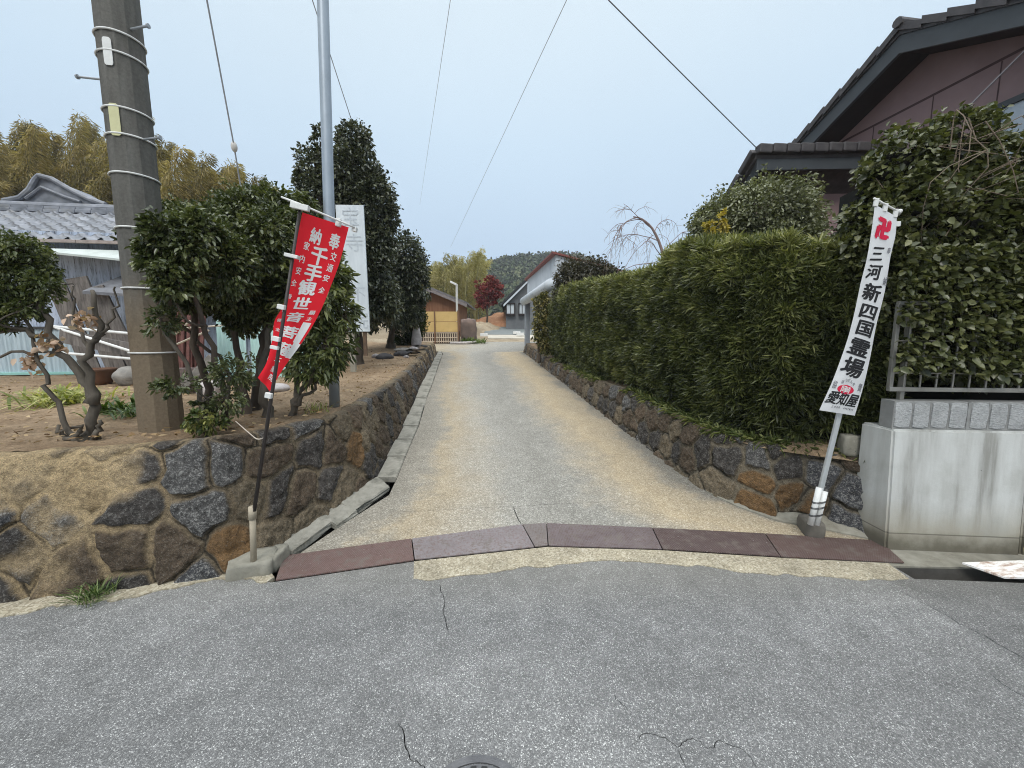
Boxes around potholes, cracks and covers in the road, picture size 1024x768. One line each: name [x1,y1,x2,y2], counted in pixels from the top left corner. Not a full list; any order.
manhole cover [444,755,514,768]
